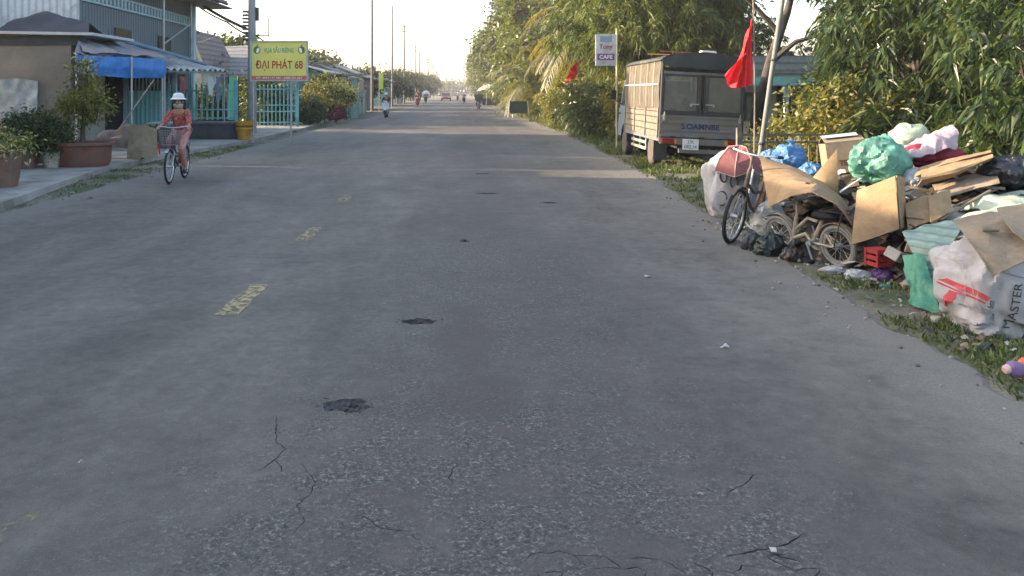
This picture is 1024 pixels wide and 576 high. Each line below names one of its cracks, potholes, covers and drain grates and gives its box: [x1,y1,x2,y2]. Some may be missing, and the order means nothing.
pothole [316,397,374,415]
crack [258,416,286,472]
crack [528,534,820,576]
pothole [396,316,444,325]
